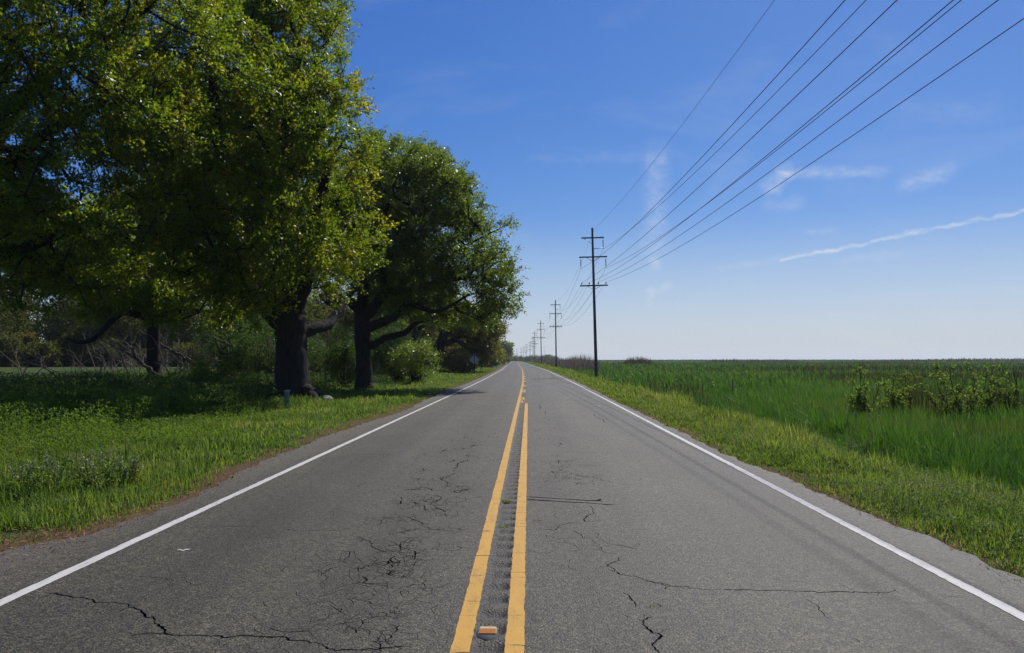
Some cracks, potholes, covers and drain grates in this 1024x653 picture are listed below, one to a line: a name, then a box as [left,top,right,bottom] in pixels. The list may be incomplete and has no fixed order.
crack [528,417,955,653]
crack [43,406,488,653]
